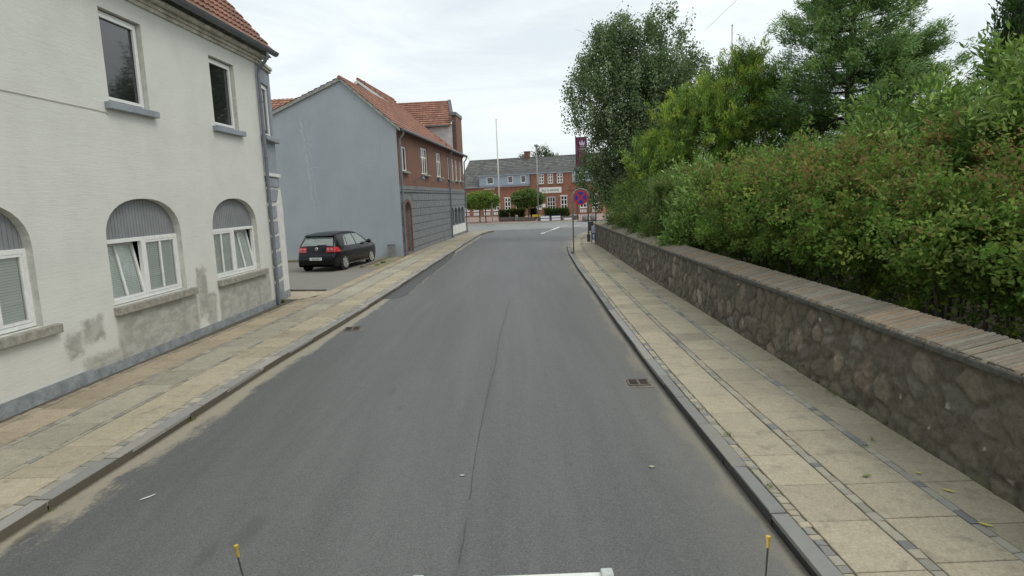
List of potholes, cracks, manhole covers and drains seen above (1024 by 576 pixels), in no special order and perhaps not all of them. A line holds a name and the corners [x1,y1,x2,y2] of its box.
drain grate [622,378,654,388]
crack [459,303,509,563]
